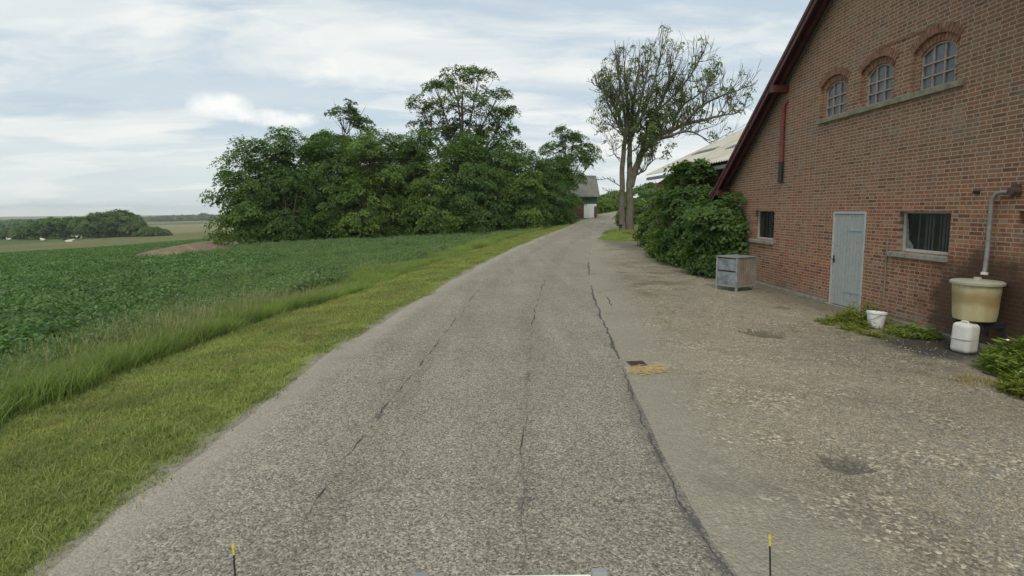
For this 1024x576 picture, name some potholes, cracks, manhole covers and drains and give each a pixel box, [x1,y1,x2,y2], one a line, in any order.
crack [519,280,545,566]
pothole [737,328,787,339]
crack [588,263,734,576]
crack [308,290,479,514]
pothole [816,452,877,475]
